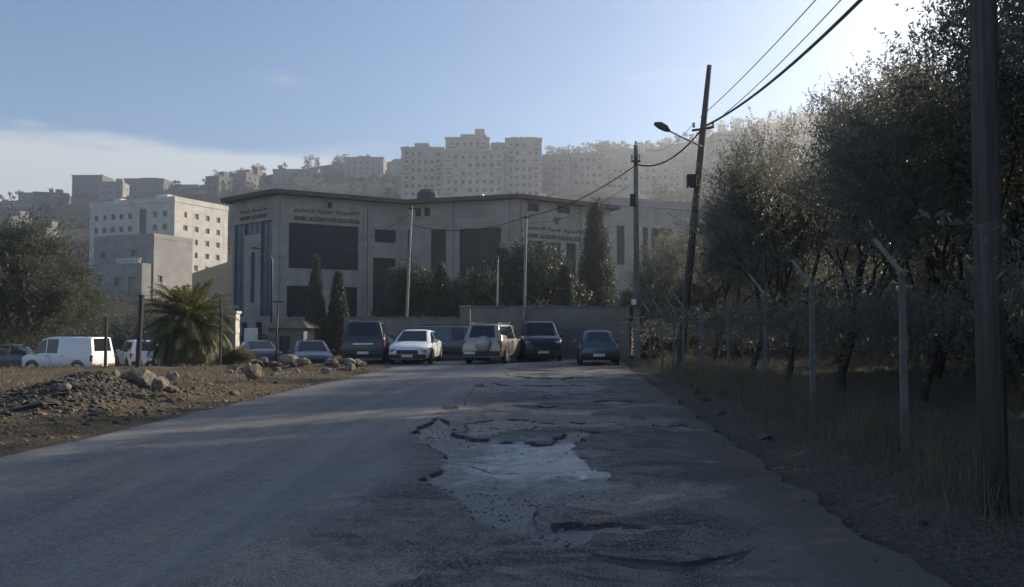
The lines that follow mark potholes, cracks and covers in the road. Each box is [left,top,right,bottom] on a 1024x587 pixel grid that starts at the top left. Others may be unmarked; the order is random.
pothole [482,383,609,393]
pothole [410,417,668,548]
pothole [489,375,608,383]
pothole [591,550,753,572]
